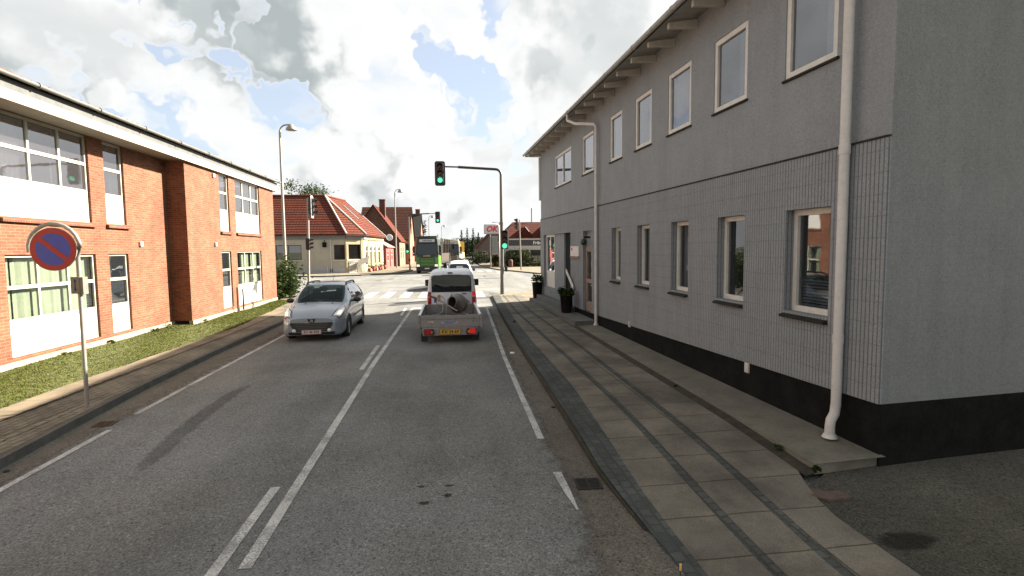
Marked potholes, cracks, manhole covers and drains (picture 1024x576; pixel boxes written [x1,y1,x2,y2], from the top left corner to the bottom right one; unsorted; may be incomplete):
drain grate [573,477,604,490]
drain grate [91,420,119,428]
